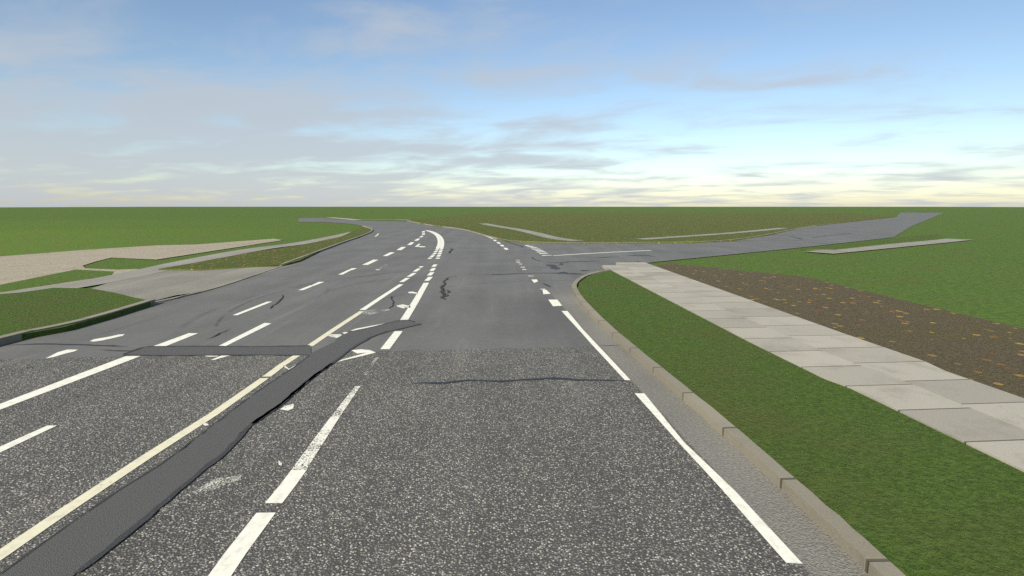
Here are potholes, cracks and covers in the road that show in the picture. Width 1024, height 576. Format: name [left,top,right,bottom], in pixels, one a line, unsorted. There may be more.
crack [439,276,451,299]
